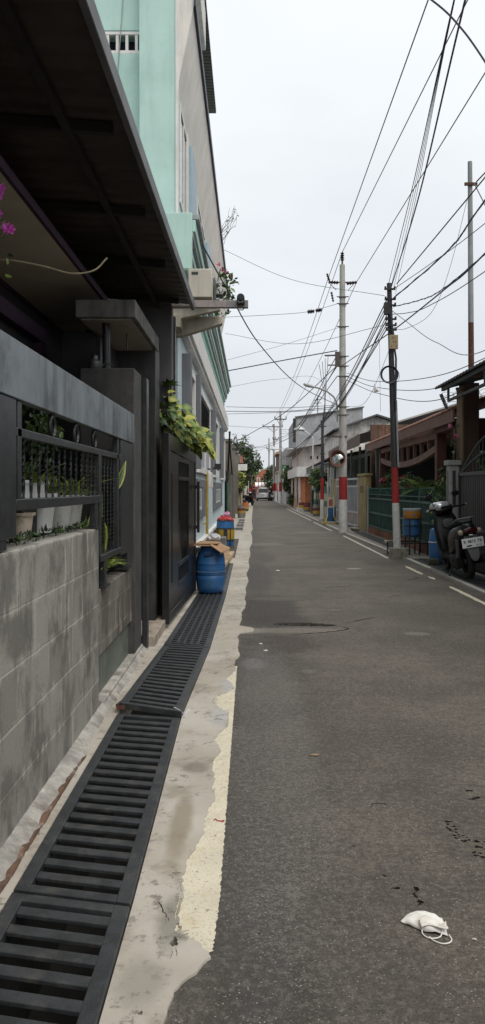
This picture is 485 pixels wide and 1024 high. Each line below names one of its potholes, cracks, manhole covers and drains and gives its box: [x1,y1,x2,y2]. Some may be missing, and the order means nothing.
crack [159,884,188,958]
crack [383,875,424,905]
drain grate [14,714,180,910]
drain grate [164,592,226,650]
drain grate [116,645,209,718]
crack [445,820,485,858]
drain grate [0,892,130,1024]
